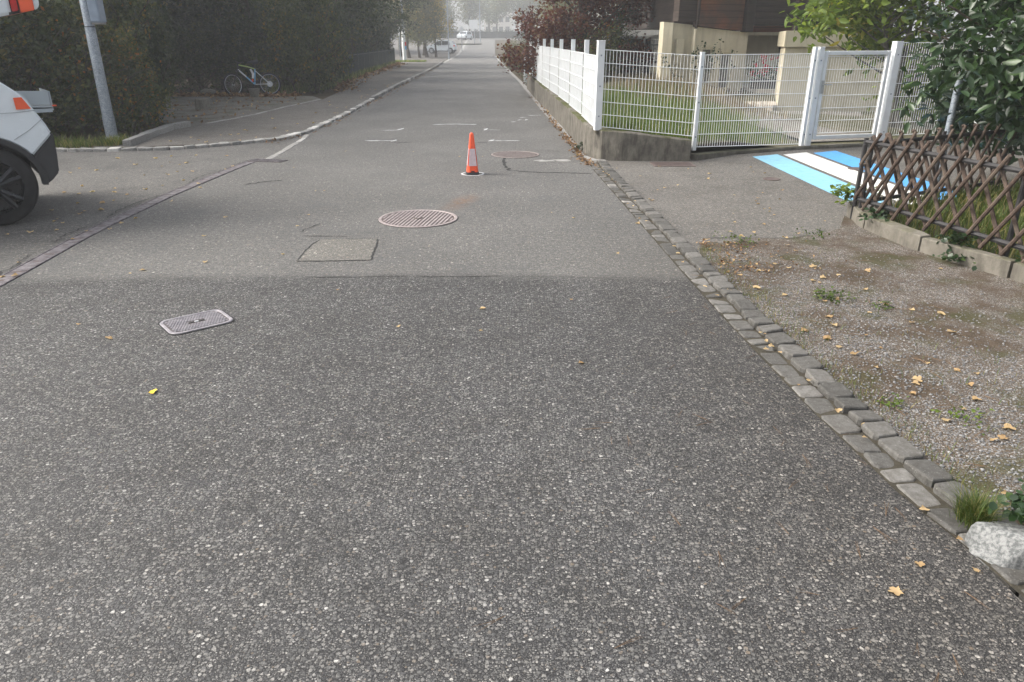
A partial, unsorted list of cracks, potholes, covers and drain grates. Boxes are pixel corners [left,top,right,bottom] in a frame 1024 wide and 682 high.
manhole cover [158,309,235,335]
manhole cover [378,209,458,228]
